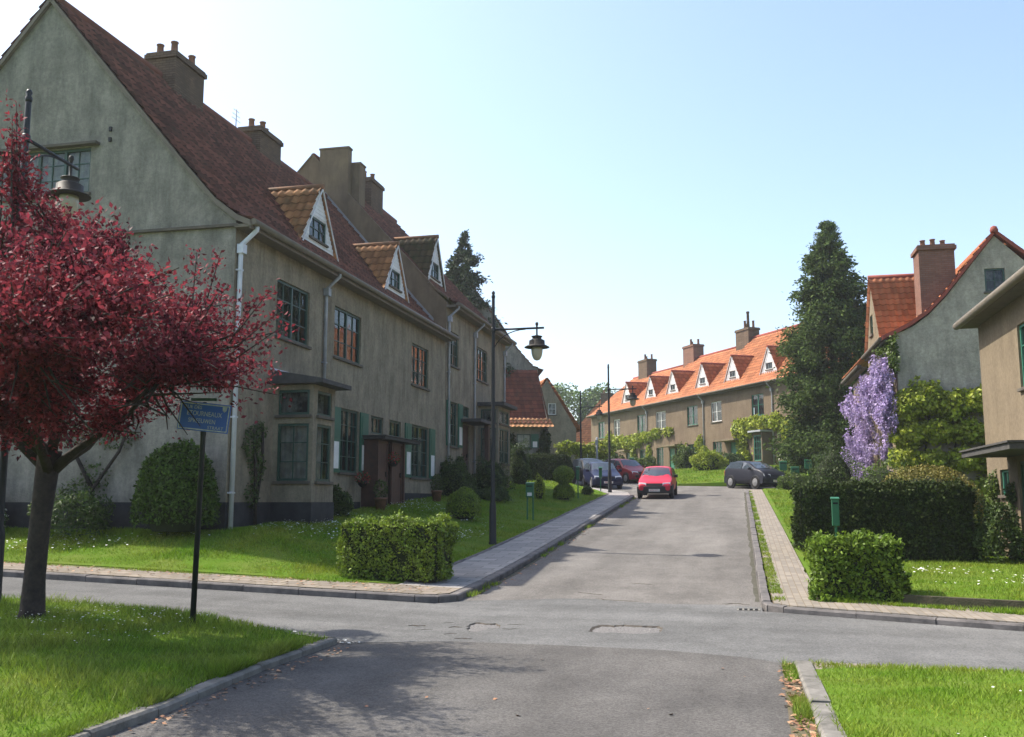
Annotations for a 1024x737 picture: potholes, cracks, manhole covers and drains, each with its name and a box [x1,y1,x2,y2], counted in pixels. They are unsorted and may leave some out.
pothole [466,622,501,632]
